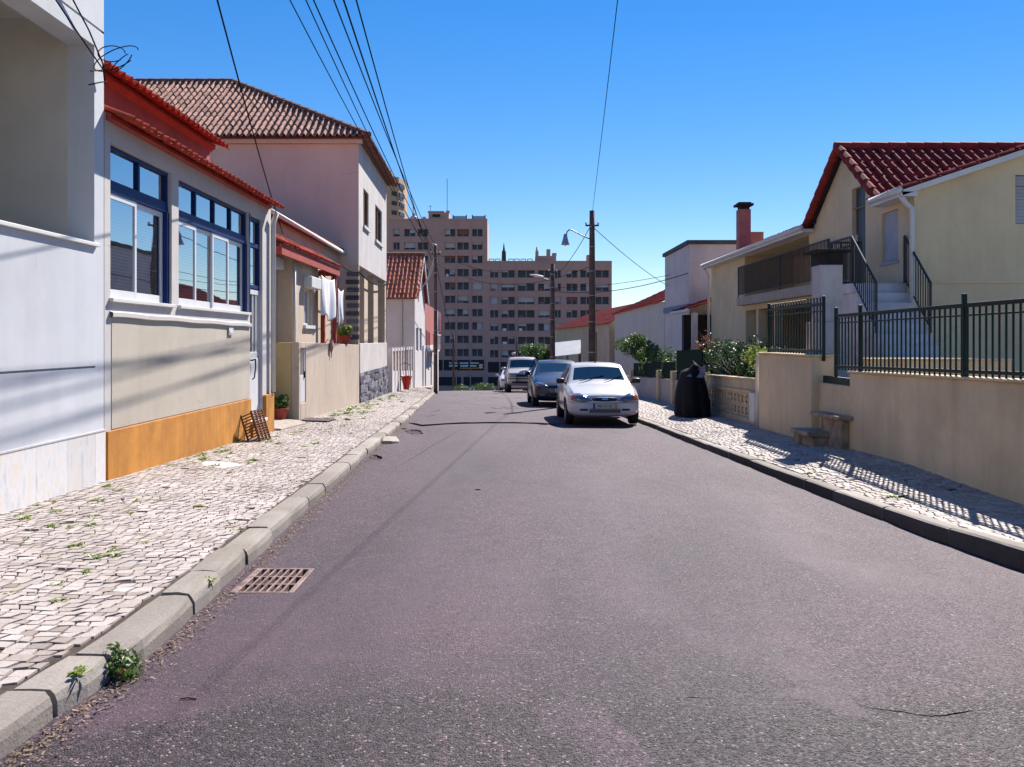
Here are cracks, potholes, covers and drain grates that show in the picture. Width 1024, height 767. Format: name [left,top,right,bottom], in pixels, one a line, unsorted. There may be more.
crack [858,705,995,717]
drain grate [229,568,315,594]
